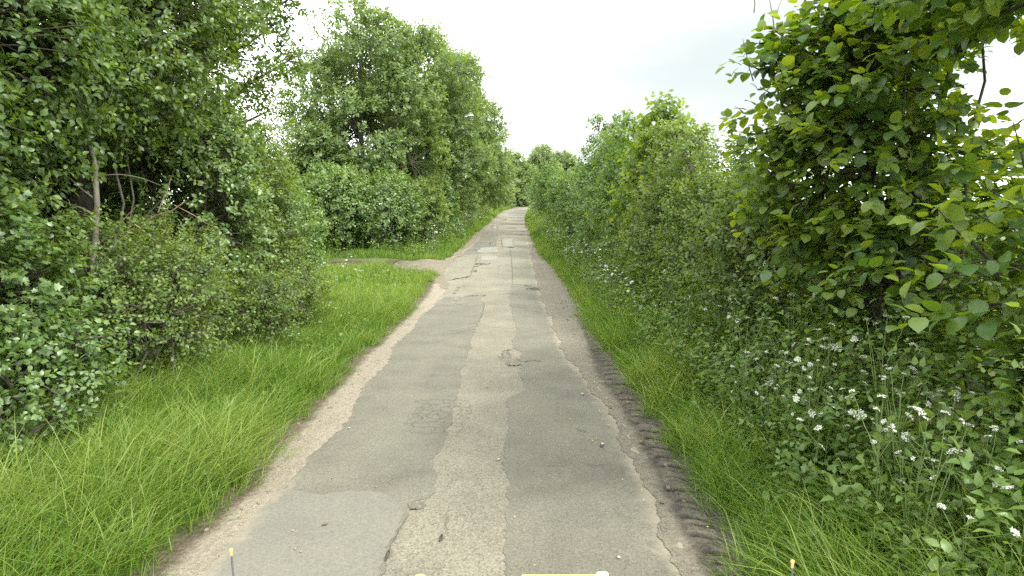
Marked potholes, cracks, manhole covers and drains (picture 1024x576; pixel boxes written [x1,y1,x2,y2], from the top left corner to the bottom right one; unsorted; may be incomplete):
pothole [505,356,524,366]
